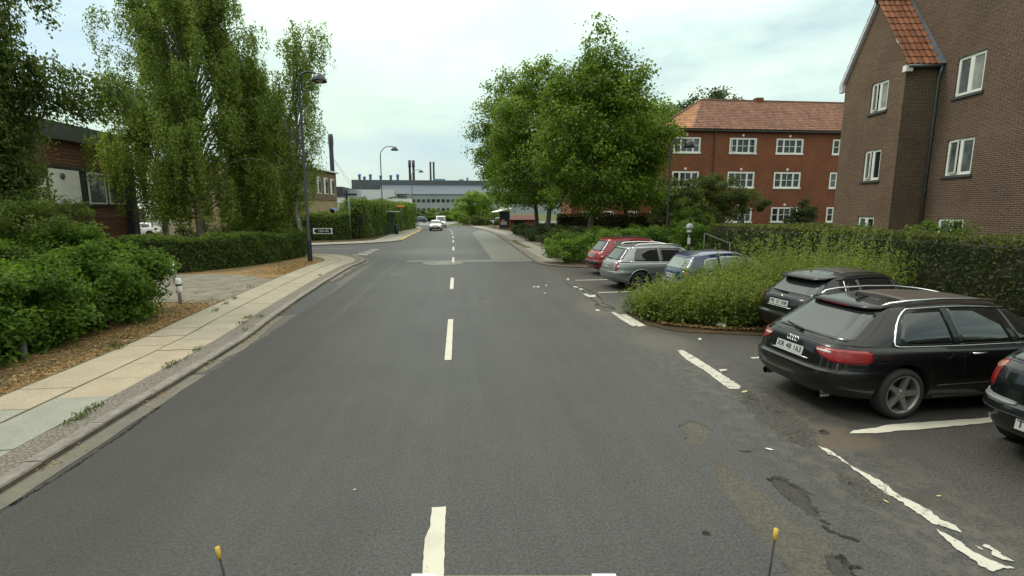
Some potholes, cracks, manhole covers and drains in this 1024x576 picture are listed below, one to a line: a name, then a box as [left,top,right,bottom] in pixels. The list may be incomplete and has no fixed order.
pothole [823,553,852,576]
